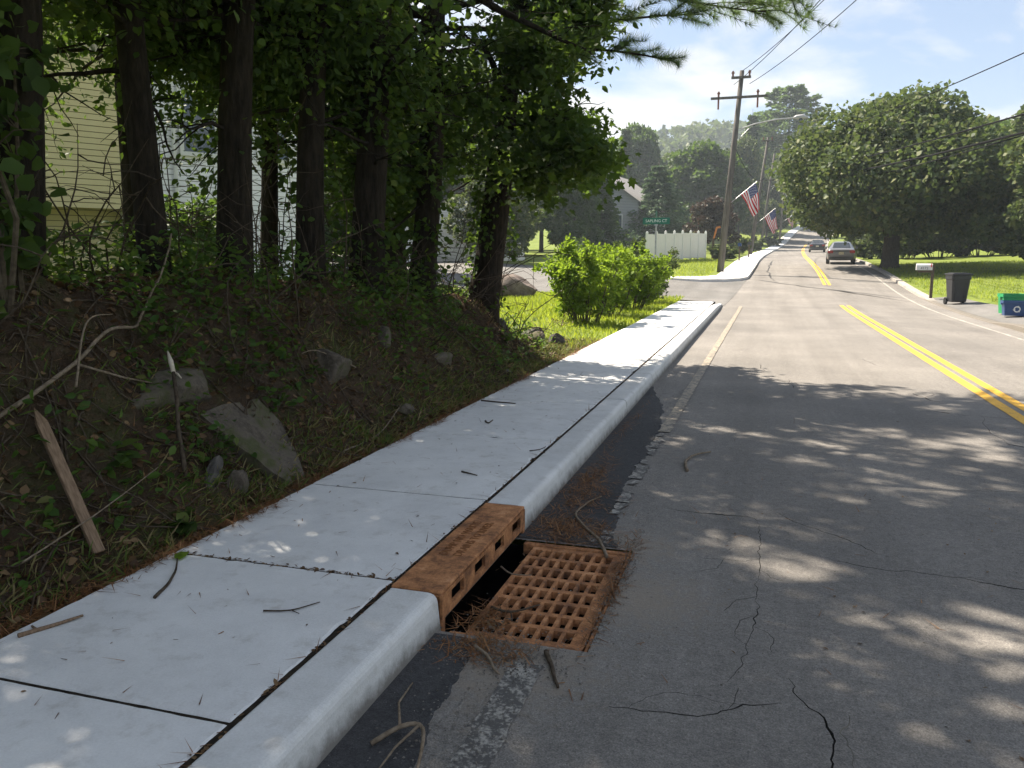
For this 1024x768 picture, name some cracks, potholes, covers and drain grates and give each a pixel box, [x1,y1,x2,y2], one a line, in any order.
crack [609,679,854,768]
drain grate [392,503,632,652]
crack [673,509,781,682]
crack [779,513,1024,590]
